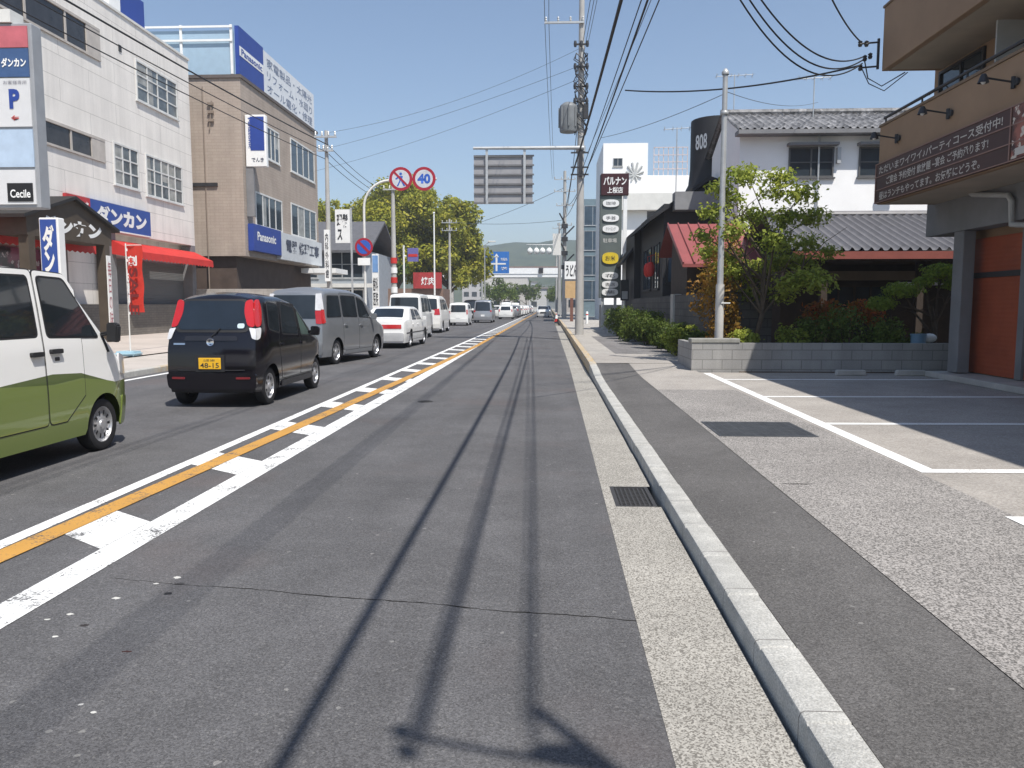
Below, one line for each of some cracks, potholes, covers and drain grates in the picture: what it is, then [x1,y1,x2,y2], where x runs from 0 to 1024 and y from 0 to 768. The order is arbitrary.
crack [107,577,636,621]
drain grate [609,486,658,507]
